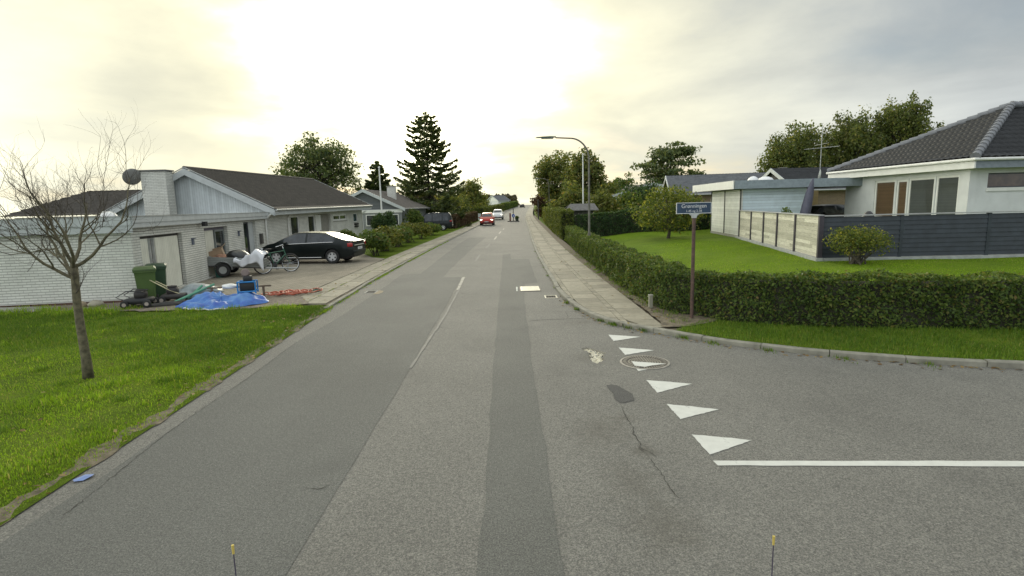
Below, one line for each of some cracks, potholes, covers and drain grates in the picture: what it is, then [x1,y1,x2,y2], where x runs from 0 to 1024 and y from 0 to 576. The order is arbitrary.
manhole cover [620,355,670,370]
crack [623,411,678,497]
